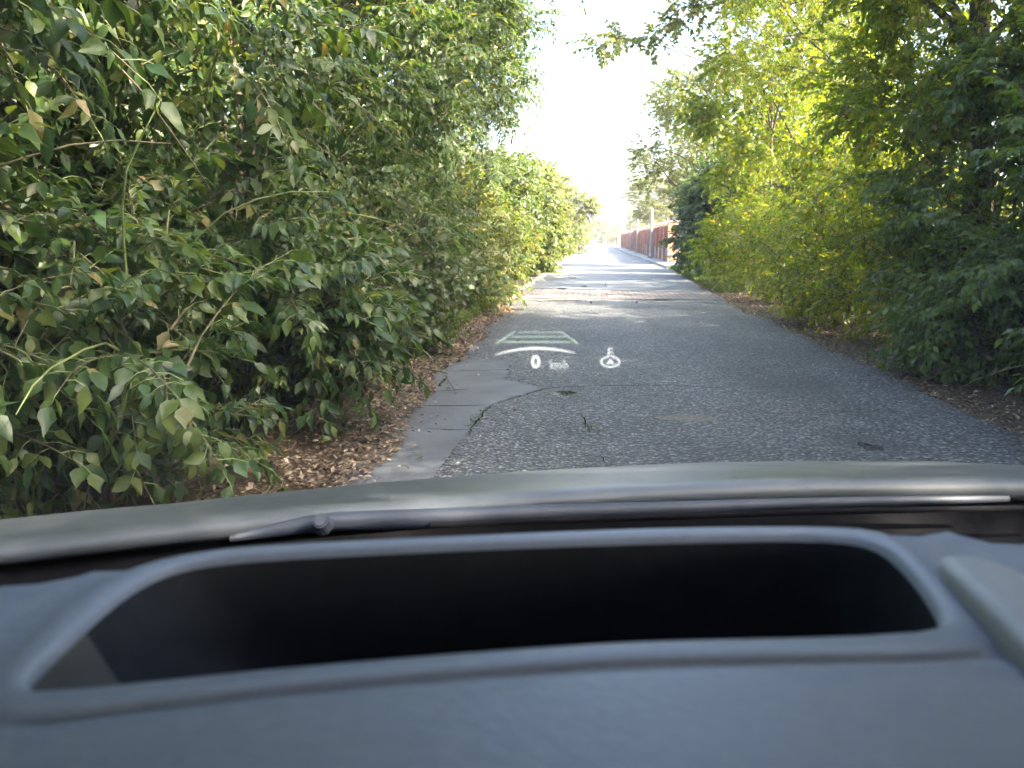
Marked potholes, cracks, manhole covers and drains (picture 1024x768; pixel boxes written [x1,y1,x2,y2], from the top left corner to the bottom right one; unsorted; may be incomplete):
pothole [857,442,884,451]
crack [424,376,721,432]
